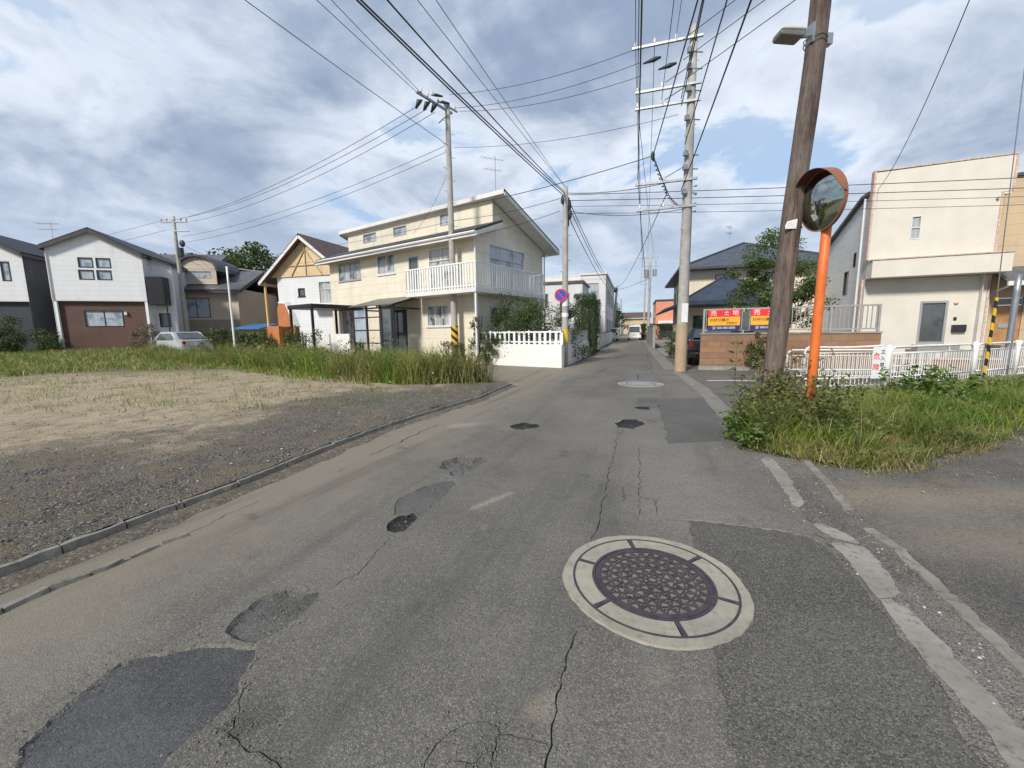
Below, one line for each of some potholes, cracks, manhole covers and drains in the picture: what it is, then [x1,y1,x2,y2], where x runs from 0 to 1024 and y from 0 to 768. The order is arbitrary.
pothole [615,419,645,429]
crack [424,430,658,768]
pothole [387,513,417,533]
pothole [439,457,488,477]
crack [215,684,283,768]
manhole cover [562,536,755,651]
